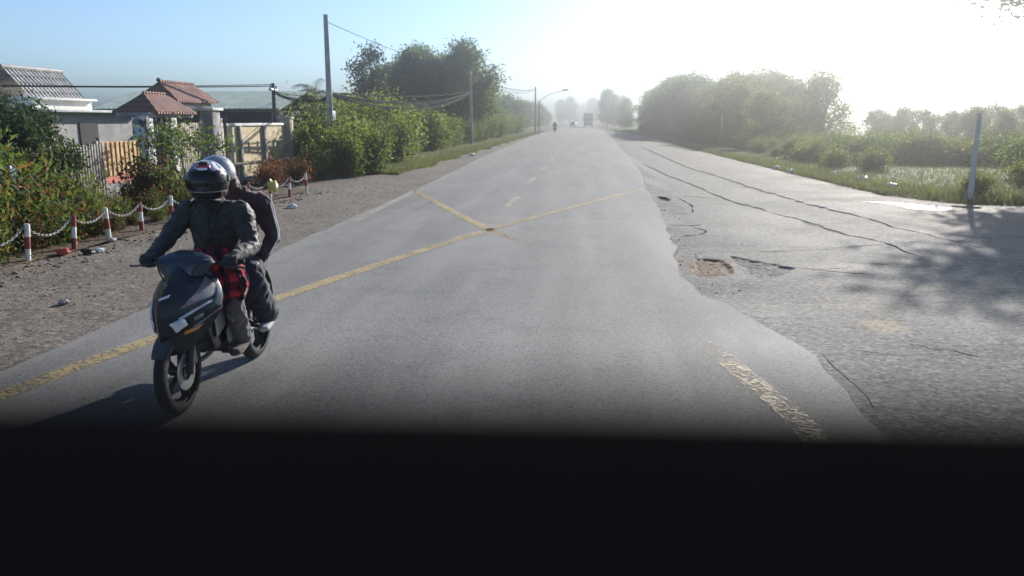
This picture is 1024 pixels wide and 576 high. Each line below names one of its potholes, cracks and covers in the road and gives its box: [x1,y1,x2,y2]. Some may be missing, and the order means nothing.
crack [660,197,716,236]
pothole [688,258,734,278]
crack [857,344,977,357]
pothole [726,254,797,279]
